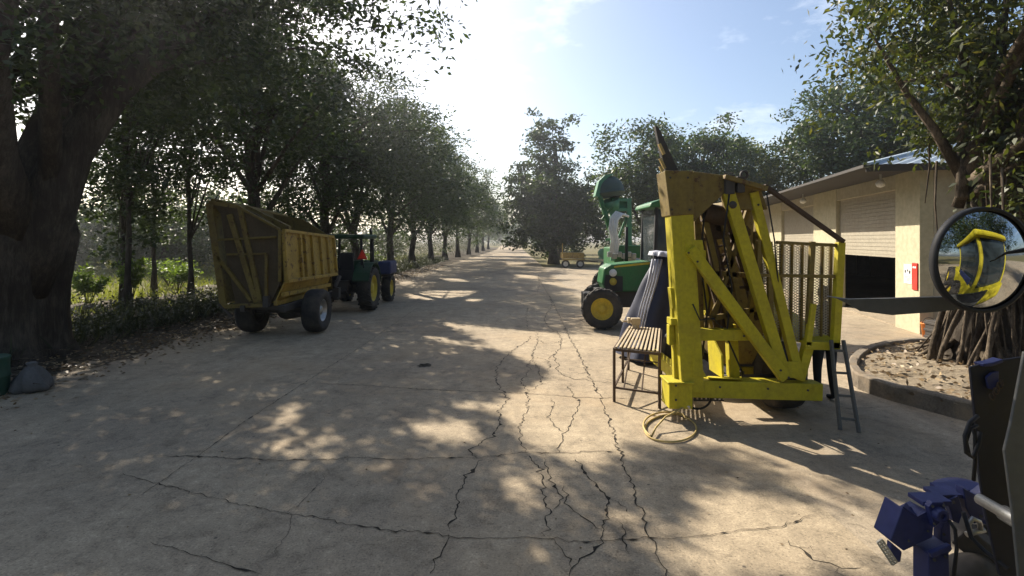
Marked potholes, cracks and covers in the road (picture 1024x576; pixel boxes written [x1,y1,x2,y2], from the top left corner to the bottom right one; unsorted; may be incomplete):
crack [788,541,856,576]
crack [256,474,325,570]
crack [430,274,633,573]
